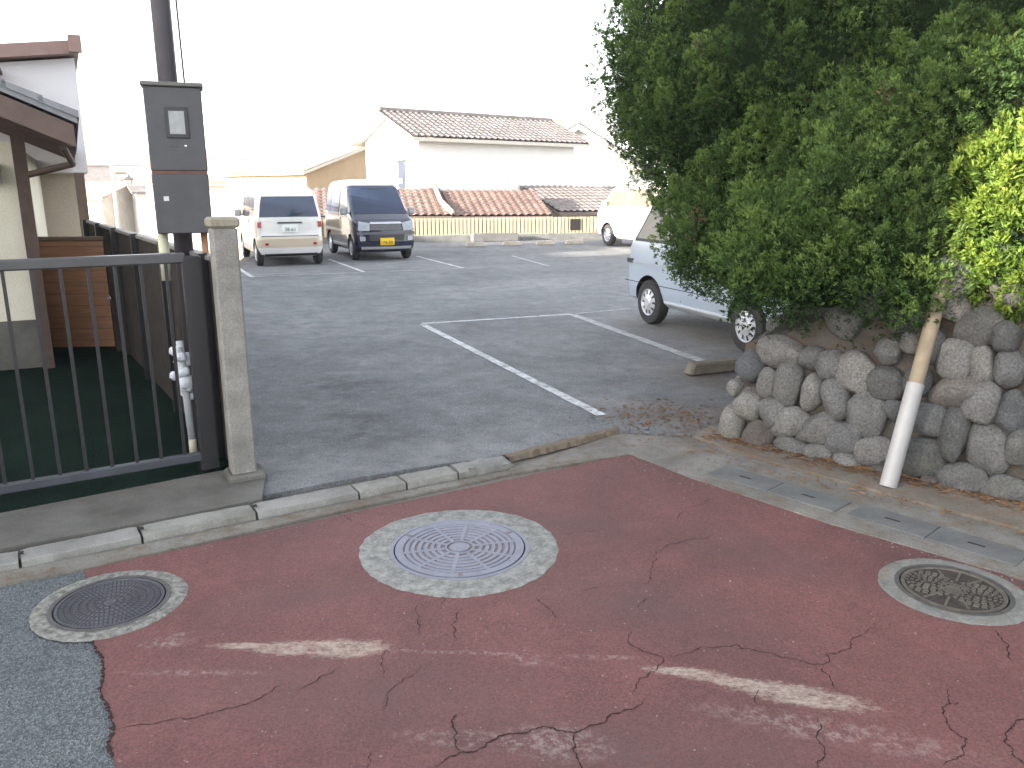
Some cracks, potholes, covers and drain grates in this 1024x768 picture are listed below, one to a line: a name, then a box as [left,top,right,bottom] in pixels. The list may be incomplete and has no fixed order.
manhole cover [878,558,1024,626]
crack [1003,718,1024,763]
crack [107,669,335,730]
crack [437,623,891,768]
crack [942,688,967,765]
manhole cover [28,570,188,642]
crack [380,652,423,713]
manhole cover [359,510,559,598]
